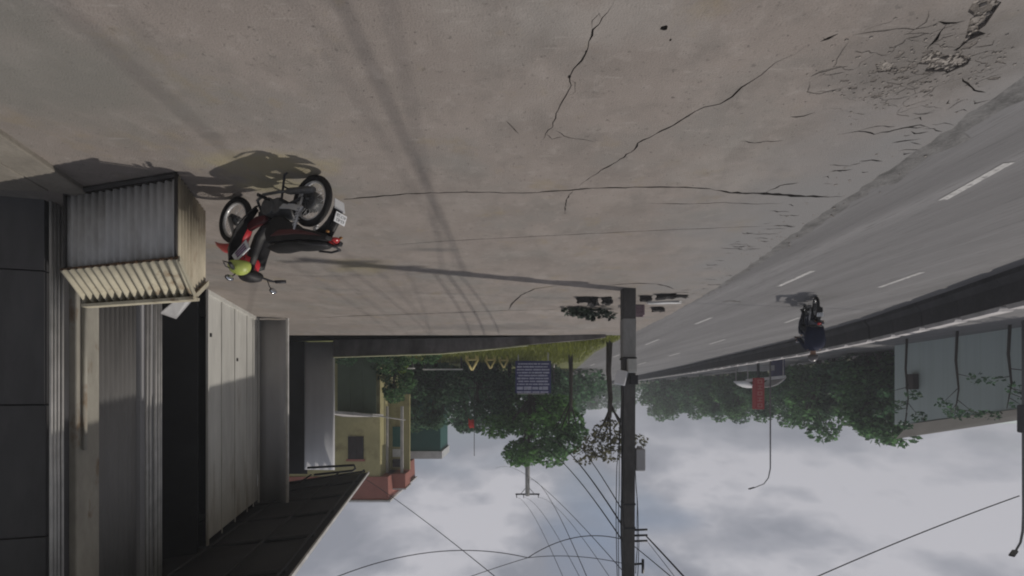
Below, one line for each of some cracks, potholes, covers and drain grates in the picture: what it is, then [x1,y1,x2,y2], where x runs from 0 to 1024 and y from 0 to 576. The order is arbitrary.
crack [352,11,1006,302]
pothole [953,0,1001,51]
pothole [918,50,971,73]
